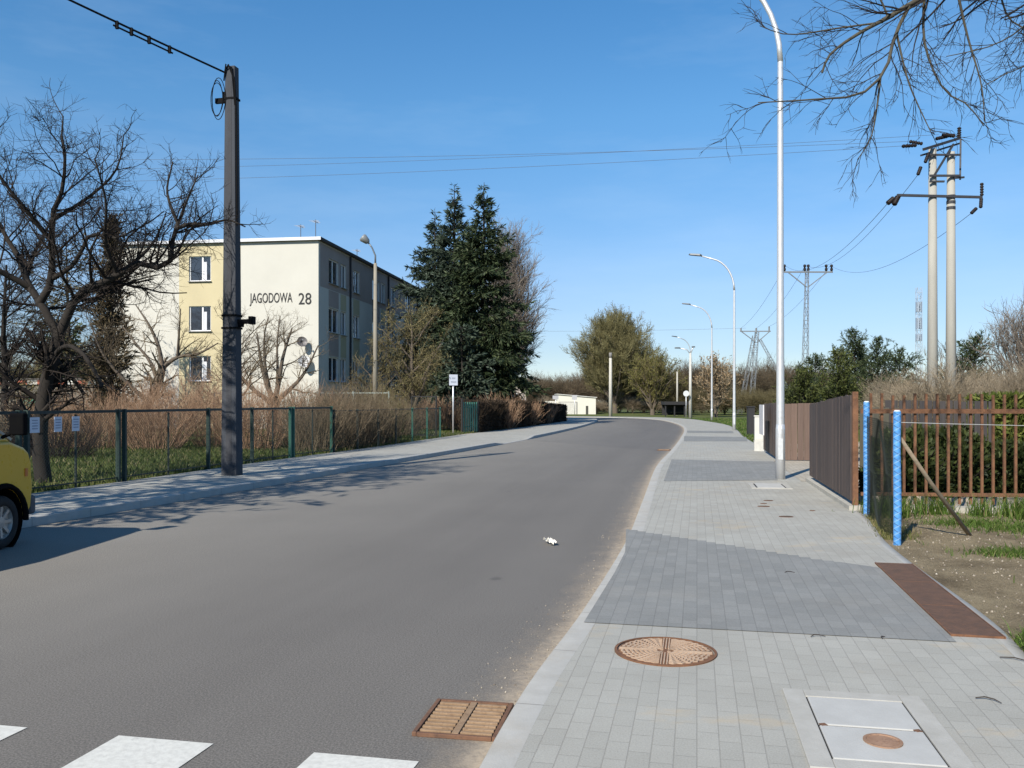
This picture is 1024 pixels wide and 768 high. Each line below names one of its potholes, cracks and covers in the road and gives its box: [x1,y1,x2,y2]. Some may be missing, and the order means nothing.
utility cover [782,688,976,768]
drain grate [412,698,514,742]
manhole cover [614,637,717,667]
